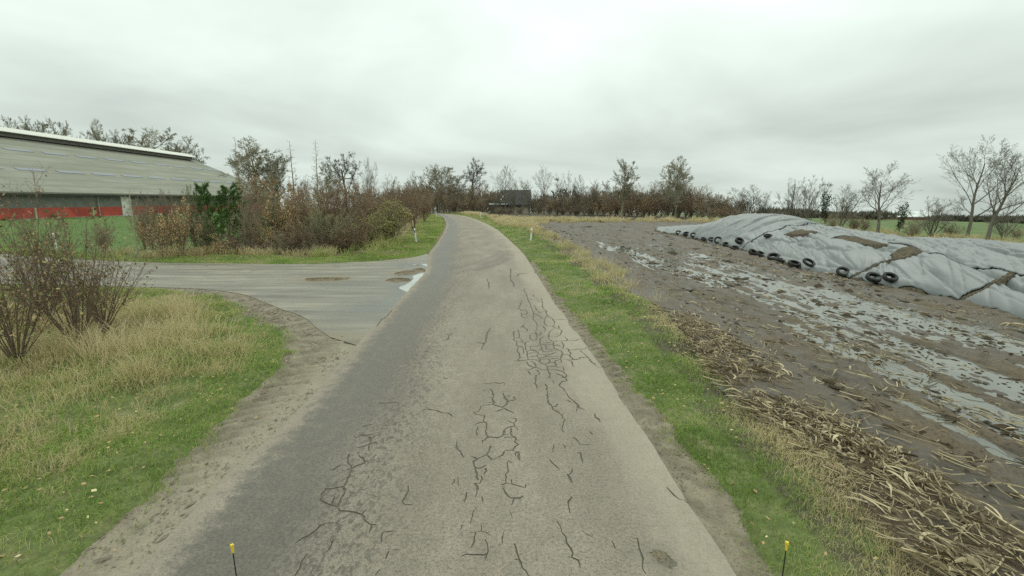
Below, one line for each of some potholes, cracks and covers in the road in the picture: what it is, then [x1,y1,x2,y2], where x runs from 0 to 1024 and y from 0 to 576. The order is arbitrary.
pothole [394,268,425,276]
crack [452,382,529,576]
crack [295,423,400,576]
crack [510,268,600,567]
crack [634,538,646,574]
